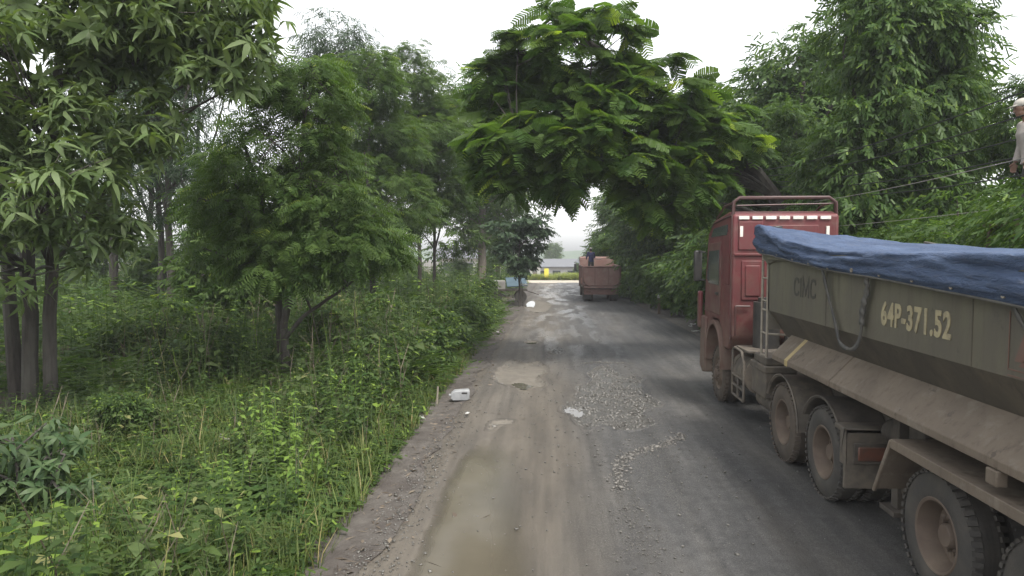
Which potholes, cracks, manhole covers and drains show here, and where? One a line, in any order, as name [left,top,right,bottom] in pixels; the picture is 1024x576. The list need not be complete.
pothole [483,418,519,432]
pothole [490,359,550,391]
